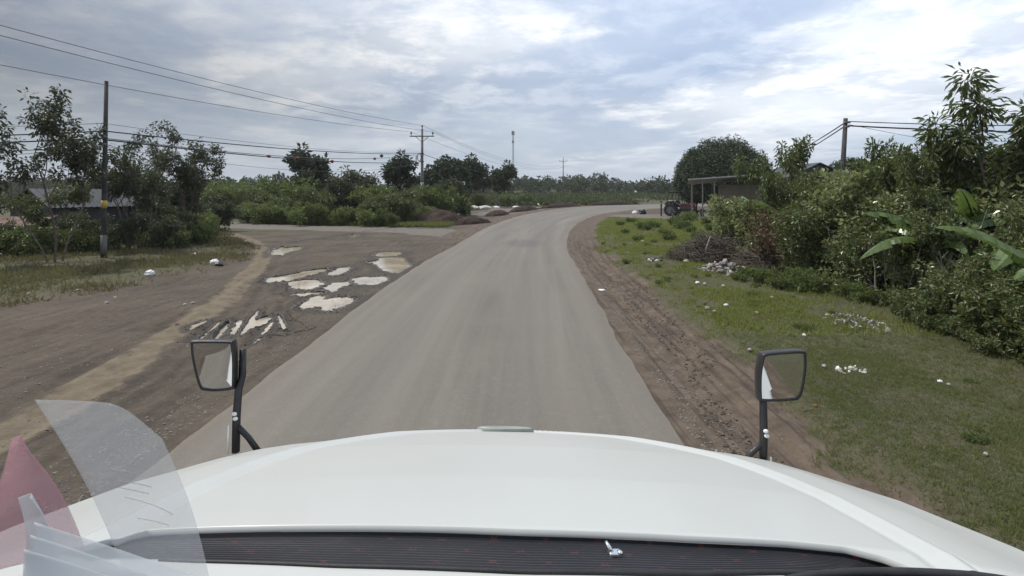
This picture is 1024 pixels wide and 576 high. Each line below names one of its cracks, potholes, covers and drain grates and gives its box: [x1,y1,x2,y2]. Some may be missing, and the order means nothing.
pothole [290,295,360,312]
pothole [324,266,354,276]
pothole [268,245,304,256]
pothole [350,275,391,286]
pothole [261,267,333,283]
pothole [281,278,329,291]
pothole [365,256,413,273]
